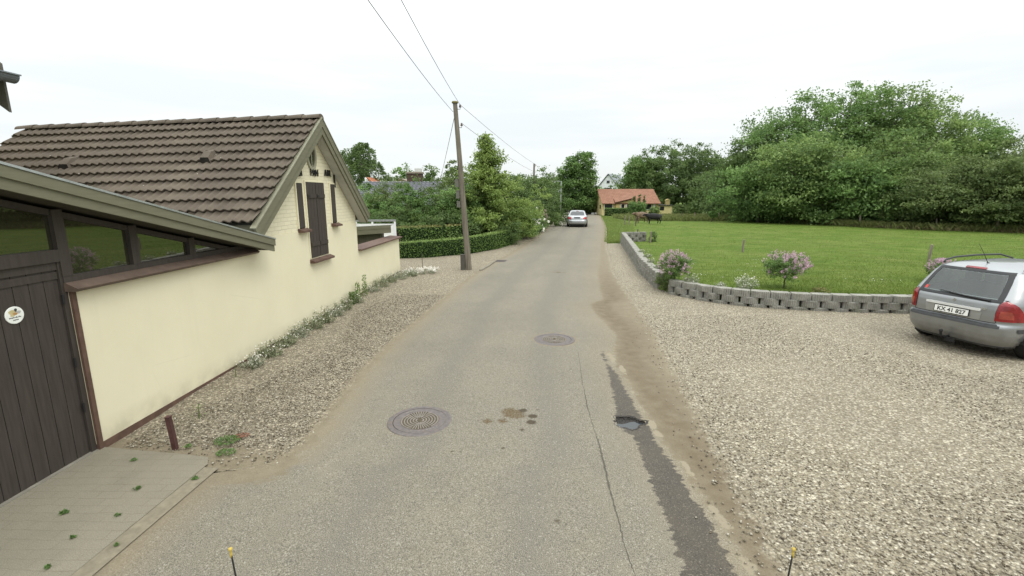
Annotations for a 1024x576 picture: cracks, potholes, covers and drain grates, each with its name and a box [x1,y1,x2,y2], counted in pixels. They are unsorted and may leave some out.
crack [578,353,636,576]
manhole cover [387,406,452,437]
pothole [613,415,649,431]
manhole cover [534,333,575,346]
